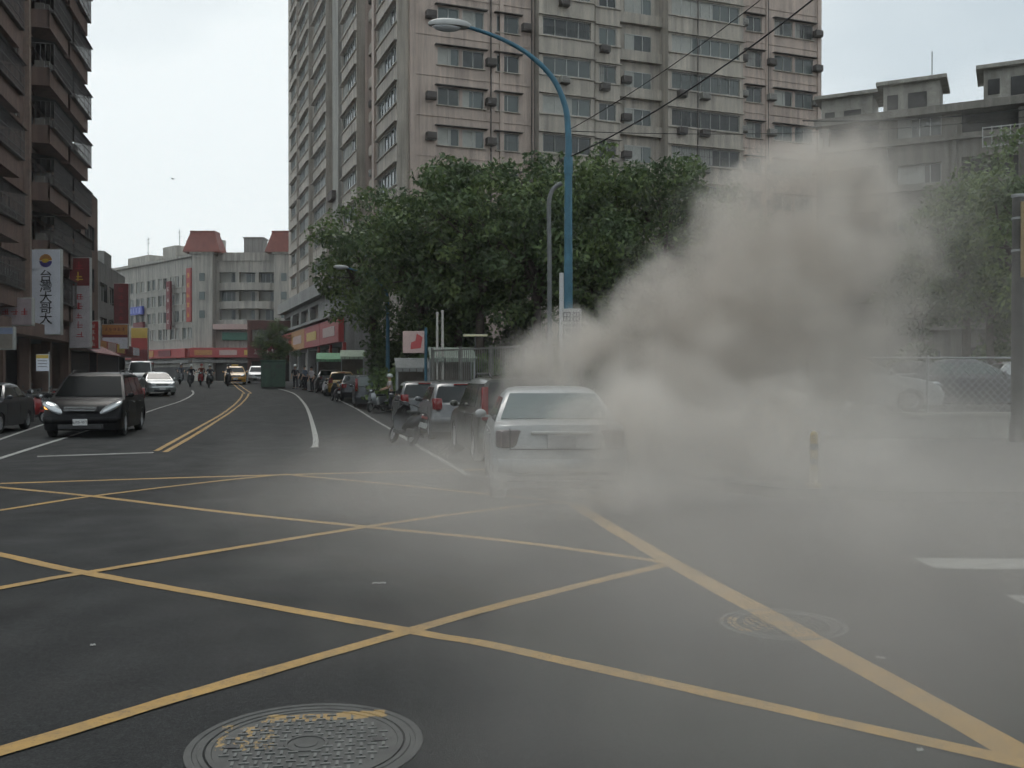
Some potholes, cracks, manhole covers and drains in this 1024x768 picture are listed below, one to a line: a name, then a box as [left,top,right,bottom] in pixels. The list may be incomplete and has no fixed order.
manhole cover [719,608,849,641]
manhole cover [183,703,423,768]
